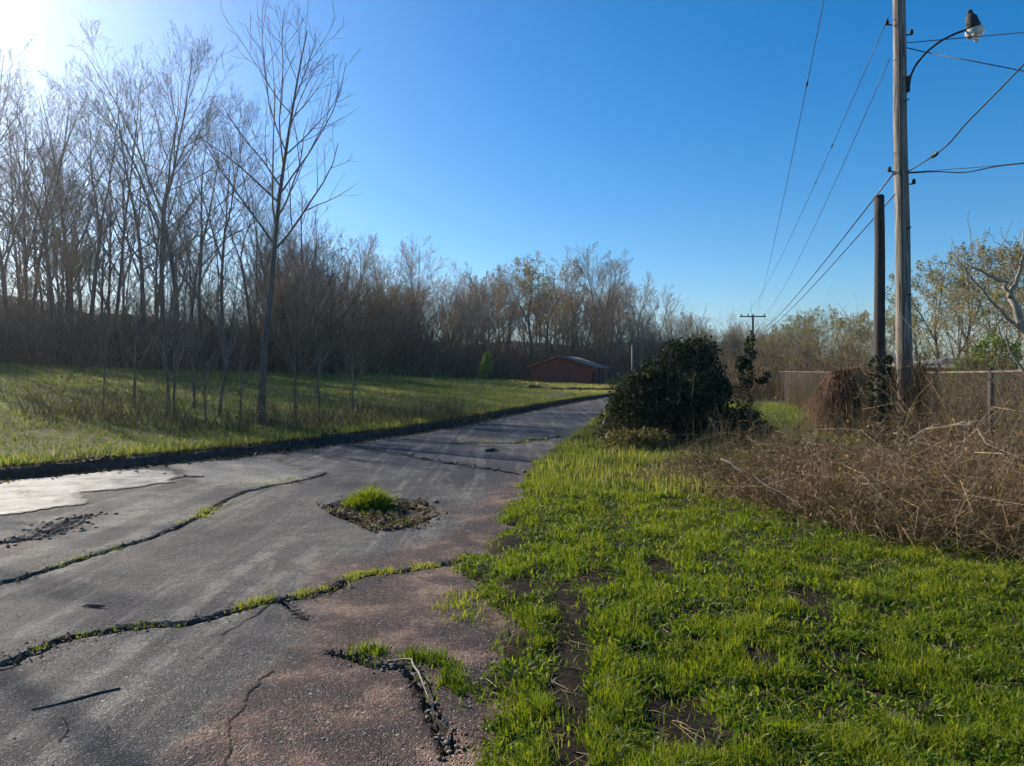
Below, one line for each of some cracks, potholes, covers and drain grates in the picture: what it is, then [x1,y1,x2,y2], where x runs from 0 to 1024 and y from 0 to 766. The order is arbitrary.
crack [348,435,563,474]
crack [224,669,275,766]
pothole [315,493,448,532]
crack [0,473,325,585]
crack [0,556,481,670]
